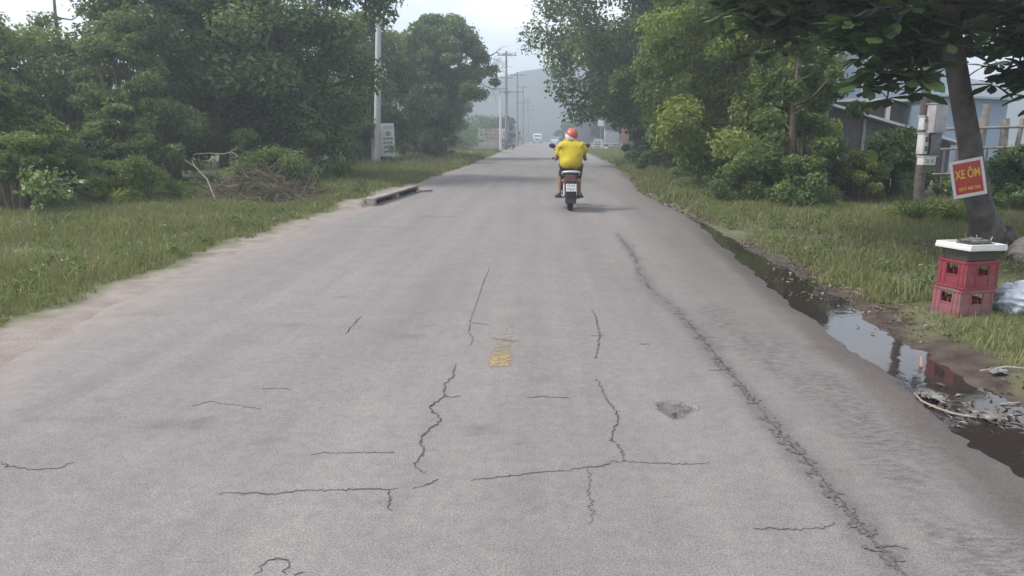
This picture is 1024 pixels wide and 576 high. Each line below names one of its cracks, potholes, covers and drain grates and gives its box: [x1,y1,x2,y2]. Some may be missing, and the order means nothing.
crack [218,363,456,511]
pothole [654,399,701,421]
crack [471,381,710,524]
crack [1,462,73,470]
crack [468,268,513,344]
crack [614,233,908,576]
crack [255,557,305,575]
crack [592,310,604,358]
